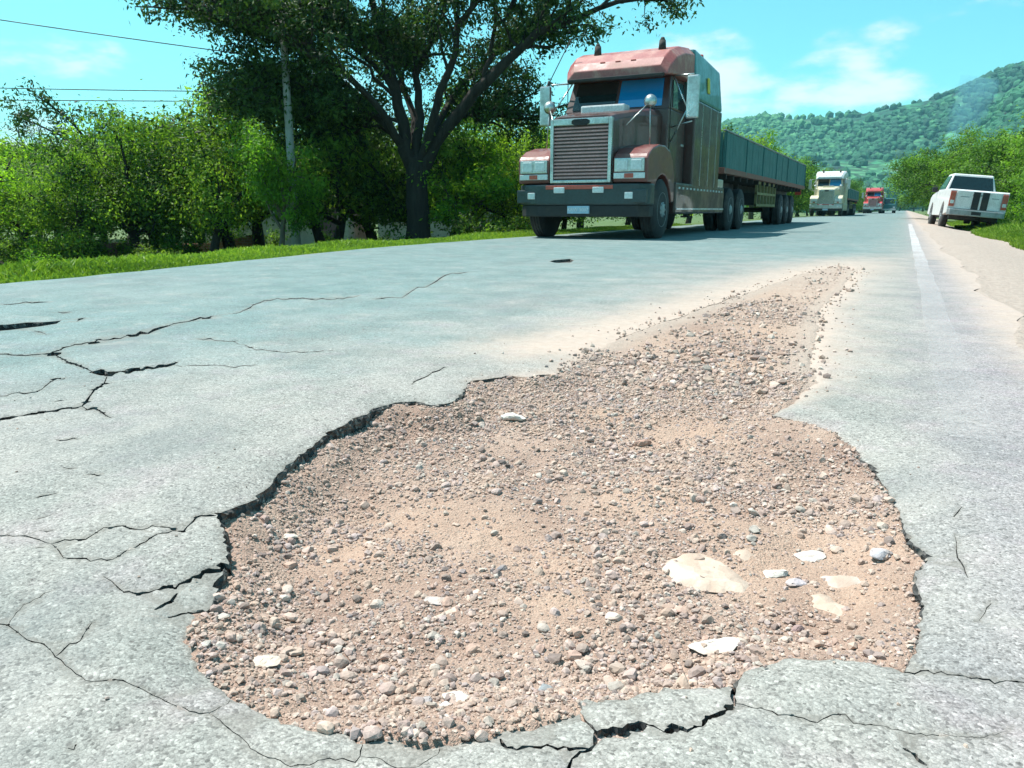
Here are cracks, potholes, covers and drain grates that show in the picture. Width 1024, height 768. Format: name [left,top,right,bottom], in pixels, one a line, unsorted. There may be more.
crack [233,272,465,314]
crack [0,592,440,768]
crack [905,670,1024,684]
crack [3,302,83,321]
pothole [183,266,932,750]
crack [0,316,333,421]
crack [0,514,229,618]
crack [500,688,1005,768]
